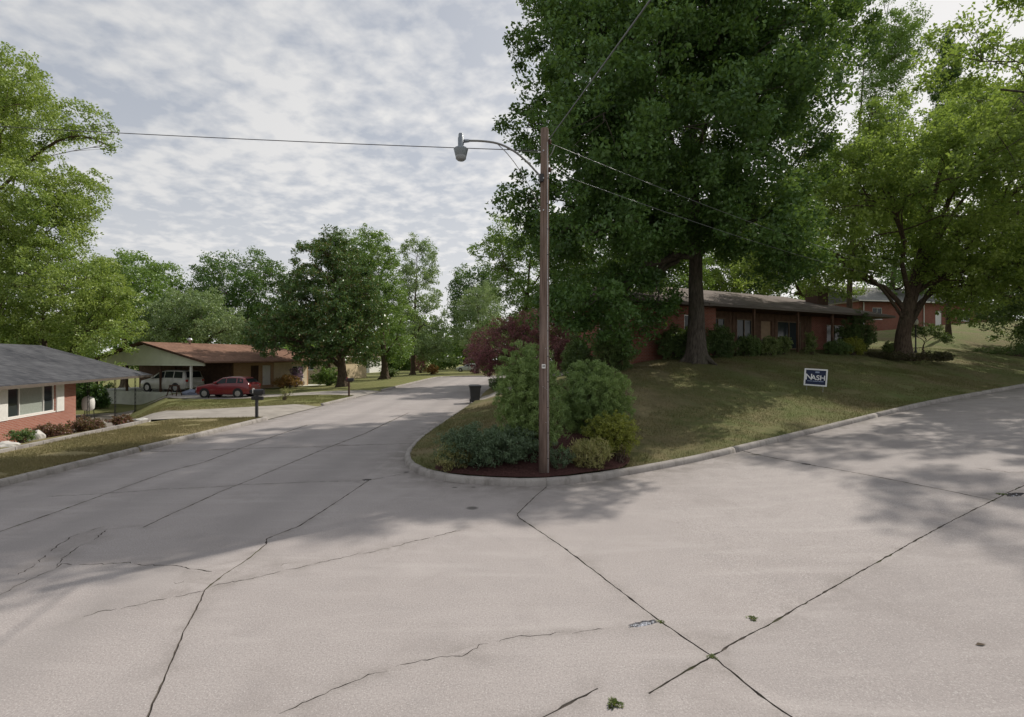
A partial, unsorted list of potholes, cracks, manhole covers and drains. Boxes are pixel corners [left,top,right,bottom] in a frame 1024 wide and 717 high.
crack [284,628,600,712]
crack [0,527,455,616]
